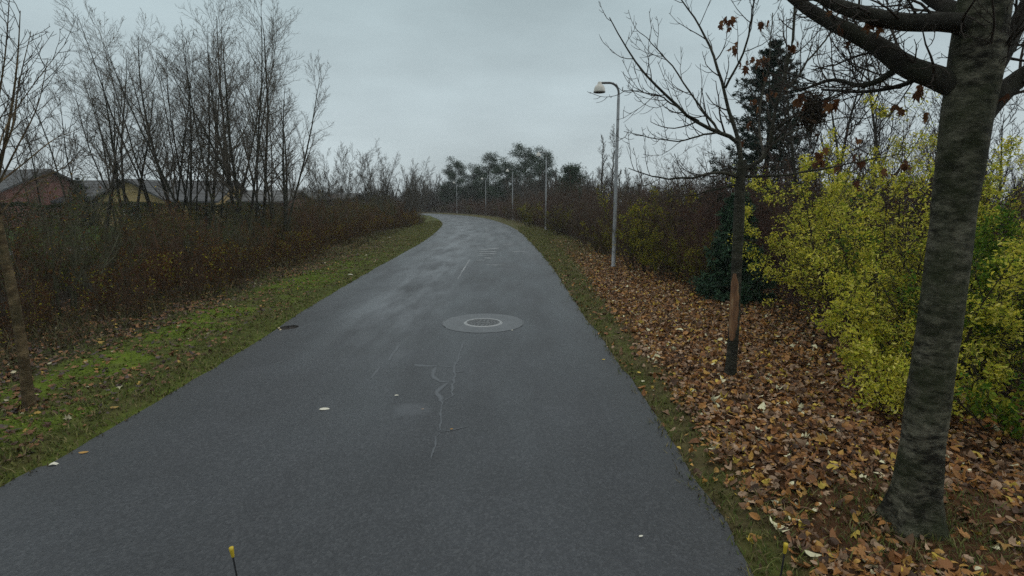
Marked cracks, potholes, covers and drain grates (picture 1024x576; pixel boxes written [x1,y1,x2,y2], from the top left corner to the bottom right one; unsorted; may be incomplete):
crack [371,342,469,460]
manhole cover [442,314,525,333]
